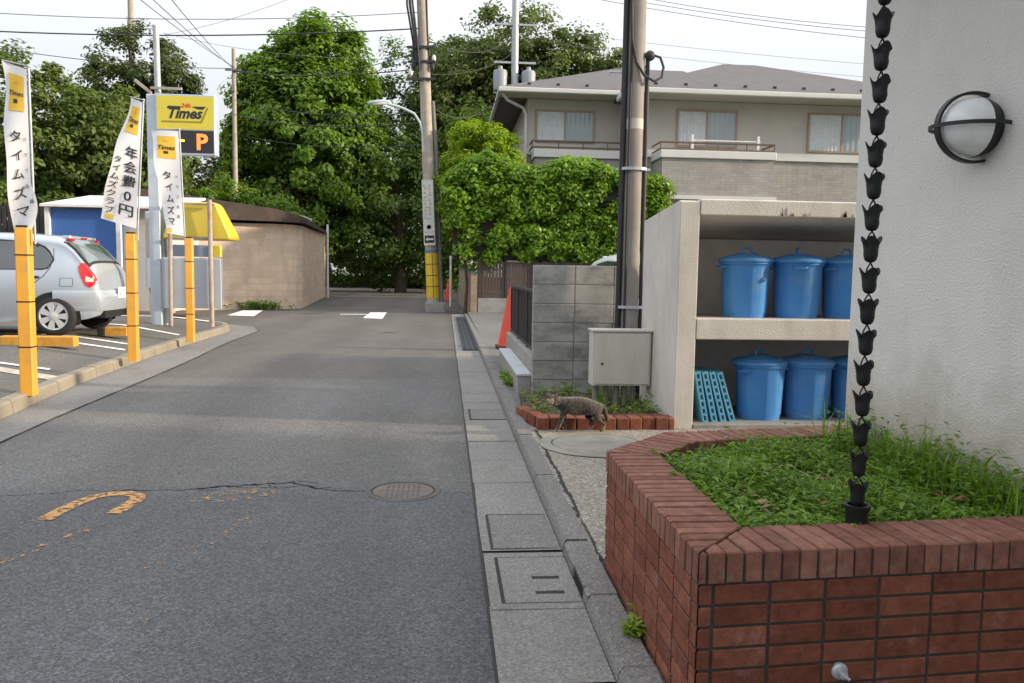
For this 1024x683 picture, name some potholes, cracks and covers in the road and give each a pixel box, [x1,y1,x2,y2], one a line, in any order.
manhole cover [539,432,645,457]
drain grate [456,317,479,351]
crack [3,480,466,496]
manhole cover [365,481,441,502]
